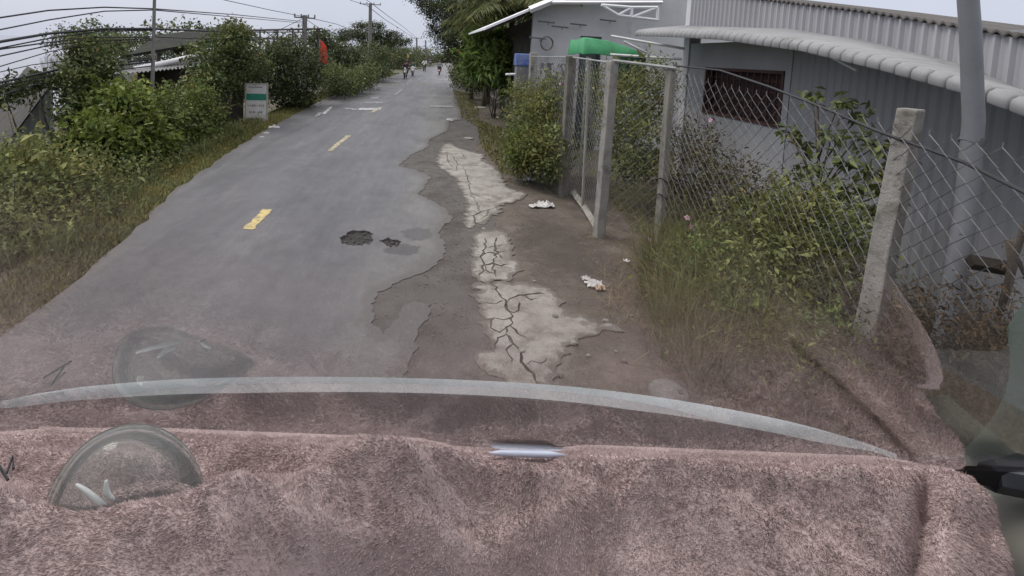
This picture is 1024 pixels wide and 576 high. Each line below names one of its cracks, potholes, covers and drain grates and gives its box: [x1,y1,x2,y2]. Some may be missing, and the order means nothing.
crack [468,203,547,383]
pothole [340,230,373,246]
pothole [379,237,402,247]
